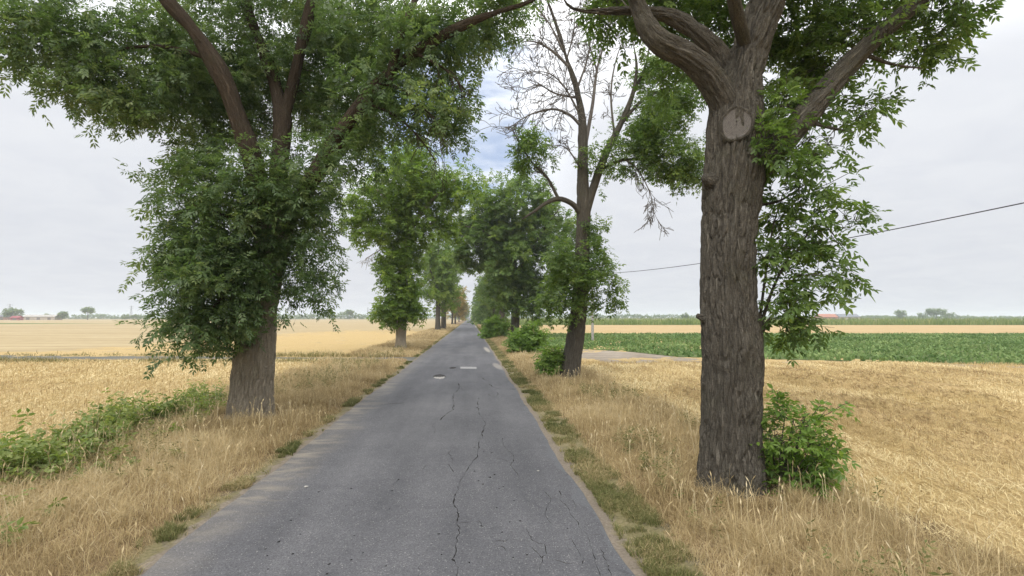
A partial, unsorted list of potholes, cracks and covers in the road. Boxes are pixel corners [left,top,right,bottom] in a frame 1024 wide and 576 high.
crack [448,378,518,576]
crack [526,491,612,575]
